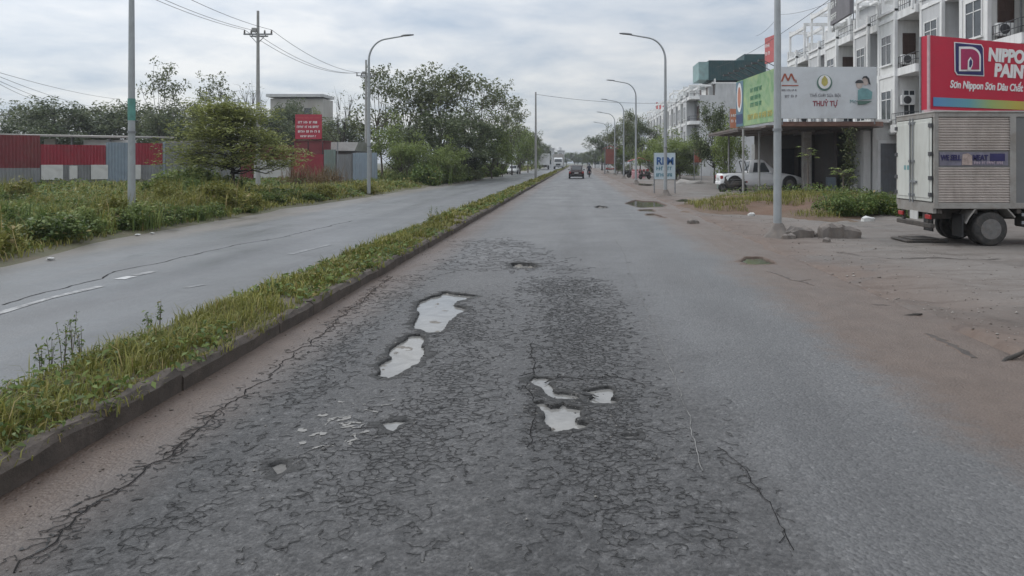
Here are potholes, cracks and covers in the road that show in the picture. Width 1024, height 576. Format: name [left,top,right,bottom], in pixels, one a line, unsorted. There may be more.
pothole [402,291,483,335]
pothole [362,332,440,381]
pothole [518,374,590,402]
crack [923,333,977,358]
pothole [625,200,667,208]
pothole [733,256,777,265]
pothole [527,399,605,437]
pothole [365,415,416,435]
crack [421,237,795,571]
crack [766,271,814,286]
crack [0,275,520,574]
